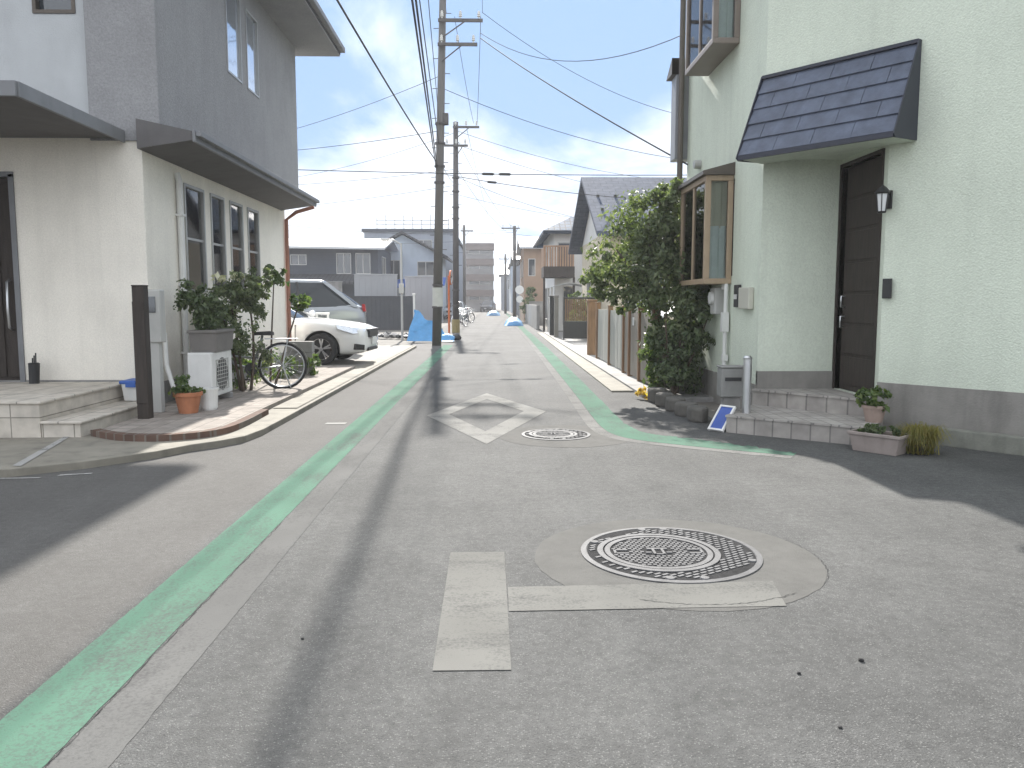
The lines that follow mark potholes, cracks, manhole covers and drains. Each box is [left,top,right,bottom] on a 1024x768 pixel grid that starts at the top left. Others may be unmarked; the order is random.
manhole cover [522,429,591,440]
manhole cover [581,527,763,584]
